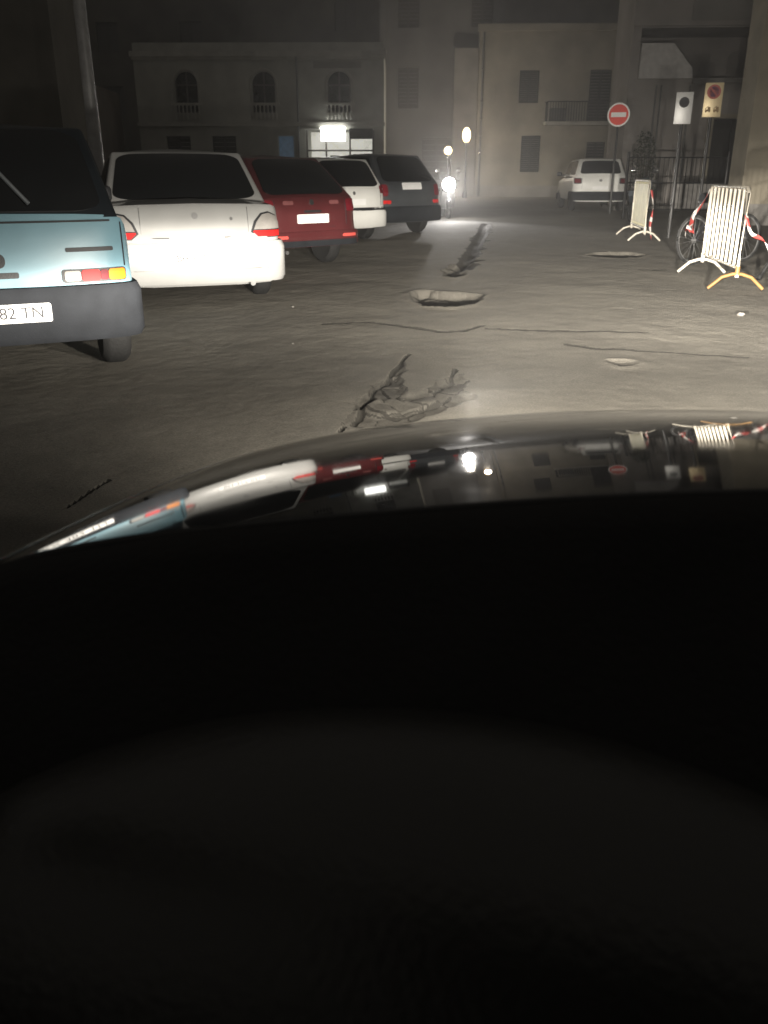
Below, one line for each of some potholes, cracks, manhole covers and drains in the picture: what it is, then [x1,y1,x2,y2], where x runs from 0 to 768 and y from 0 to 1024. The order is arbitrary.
crack [338,354,478,433]
pothole [605,358,644,367]
crack [456,223,493,272]
crack [322,321,749,358]
pothole [408,289,486,307]
crack [67,479,112,508]
